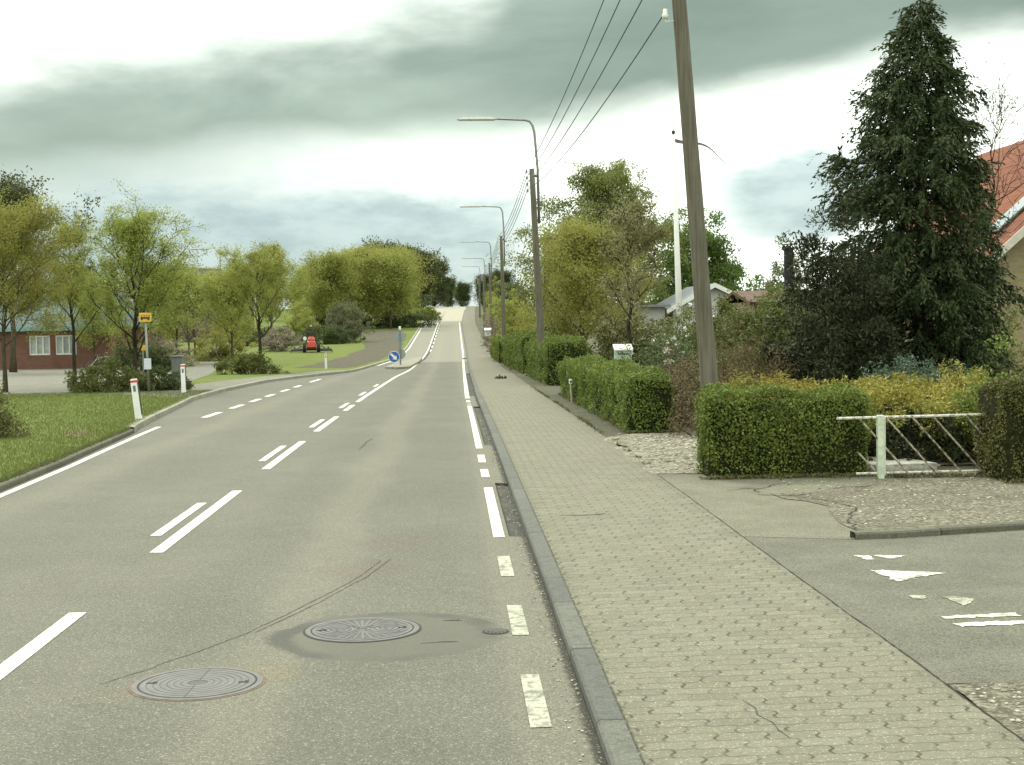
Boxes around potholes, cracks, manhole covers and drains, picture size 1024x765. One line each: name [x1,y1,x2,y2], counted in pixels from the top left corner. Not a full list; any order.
manhole cover [128,667,266,702]
crack [734,484,872,529]
manhole cover [303,617,422,643]
crack [102,631,251,684]
